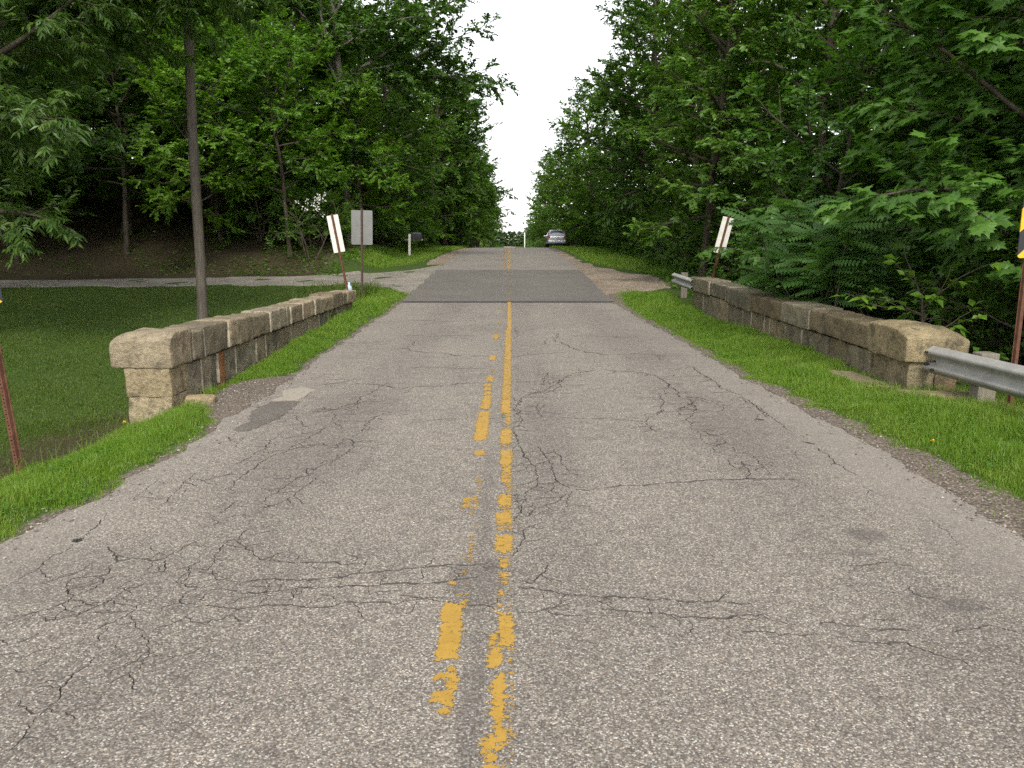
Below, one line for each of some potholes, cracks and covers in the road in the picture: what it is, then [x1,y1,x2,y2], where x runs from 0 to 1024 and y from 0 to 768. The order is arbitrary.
crack [0,517,505,752]
crack [949,624,1019,634]
crack [133,320,969,677]
